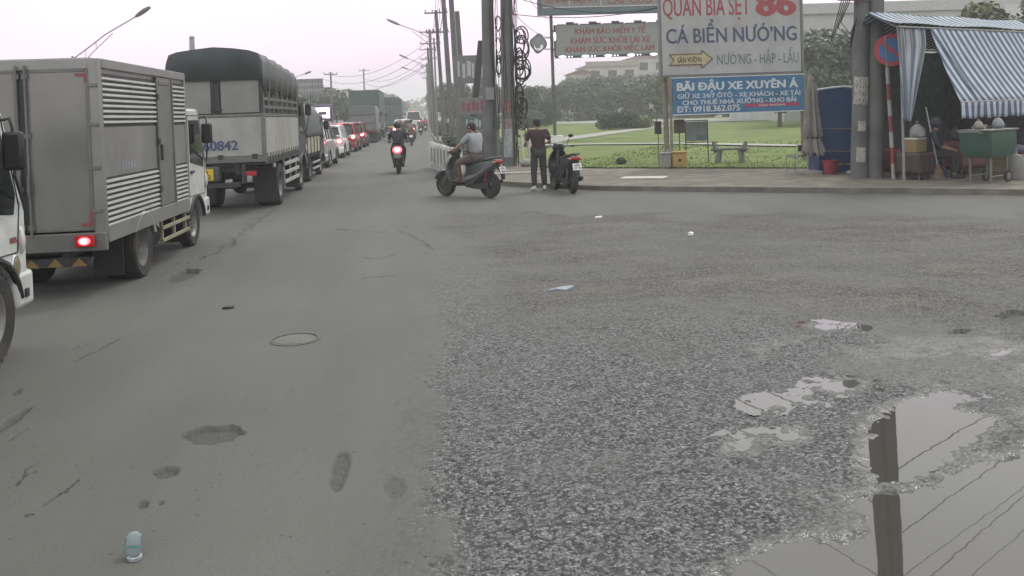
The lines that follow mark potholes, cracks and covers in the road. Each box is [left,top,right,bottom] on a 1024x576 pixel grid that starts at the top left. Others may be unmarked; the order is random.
pothole [326,450,354,495]
pothole [851,384,1005,487]
pothole [759,425,813,444]
manhole cover [269,333,321,346]
pothole [790,319,873,332]
pothole [703,437,1024,576]
pothole [709,427,776,455]
crack [334,228,435,281]
pothole [993,309,1024,325]
pothole [734,387,833,416]
pothole [149,465,181,479]
crack [15,460,80,519]
